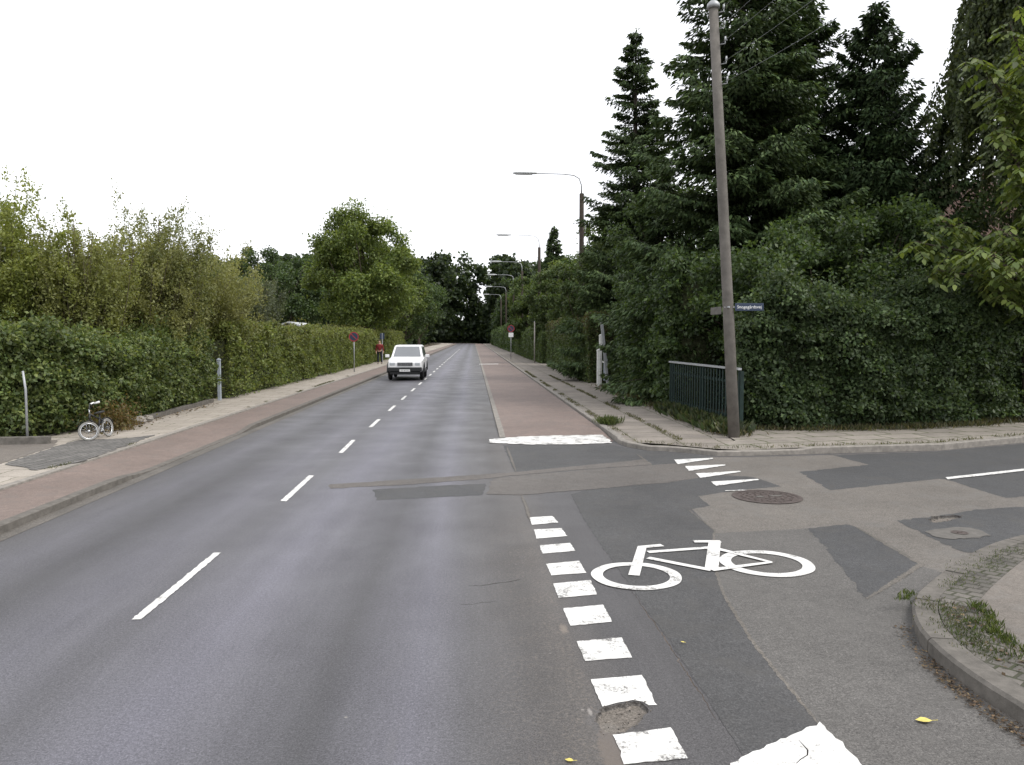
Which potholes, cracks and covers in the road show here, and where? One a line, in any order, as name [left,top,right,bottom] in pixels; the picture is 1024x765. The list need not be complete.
manhole cover [732,490,803,504]
pothole [594,699,651,735]
pothole [928,514,963,523]
